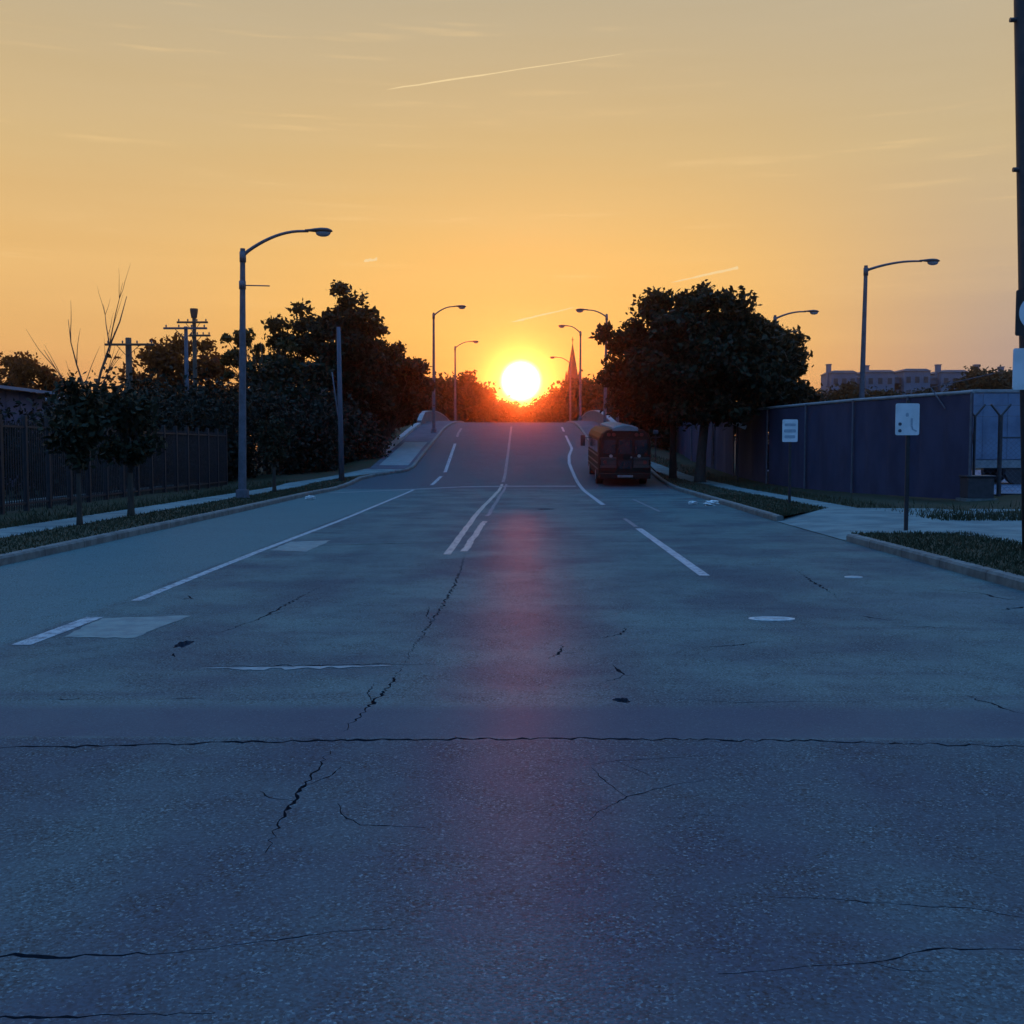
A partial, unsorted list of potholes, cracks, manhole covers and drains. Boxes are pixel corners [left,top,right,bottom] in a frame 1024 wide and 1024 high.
crack [779,897,1024,918]
crack [0,928,391,959]
crack [216,555,466,853]
crack [590,756,733,820]
crack [718,948,1021,974]
crack [172,588,317,657]
